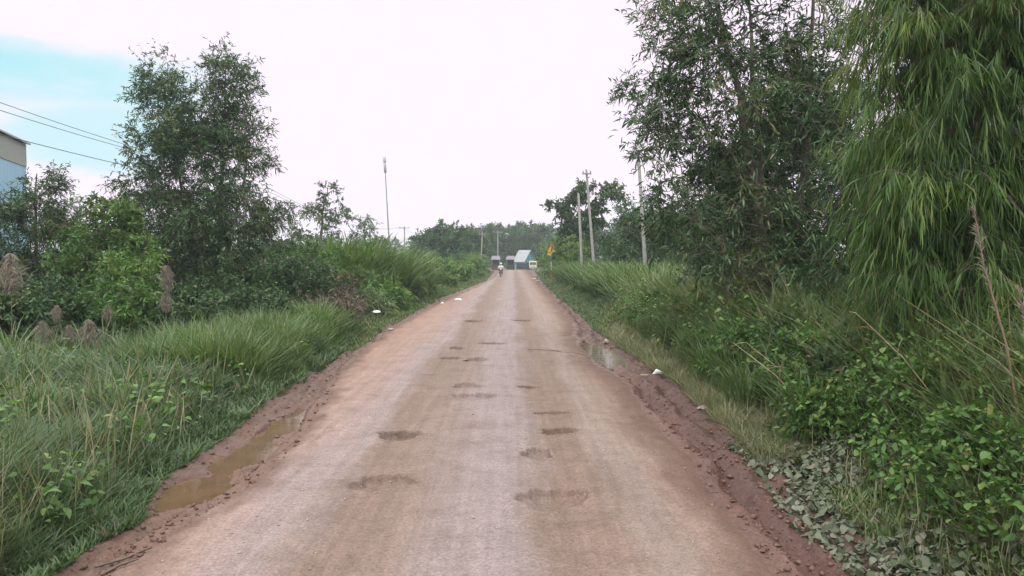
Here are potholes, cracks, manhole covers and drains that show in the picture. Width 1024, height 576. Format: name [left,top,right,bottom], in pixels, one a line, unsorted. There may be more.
pothole [368,429,436,444]
pothole [534,426,591,438]
pothole [336,472,432,496]
pothole [445,392,504,403]
pothole [501,486,602,518]
pothole [514,445,560,464]
pothole [447,382,487,391]
